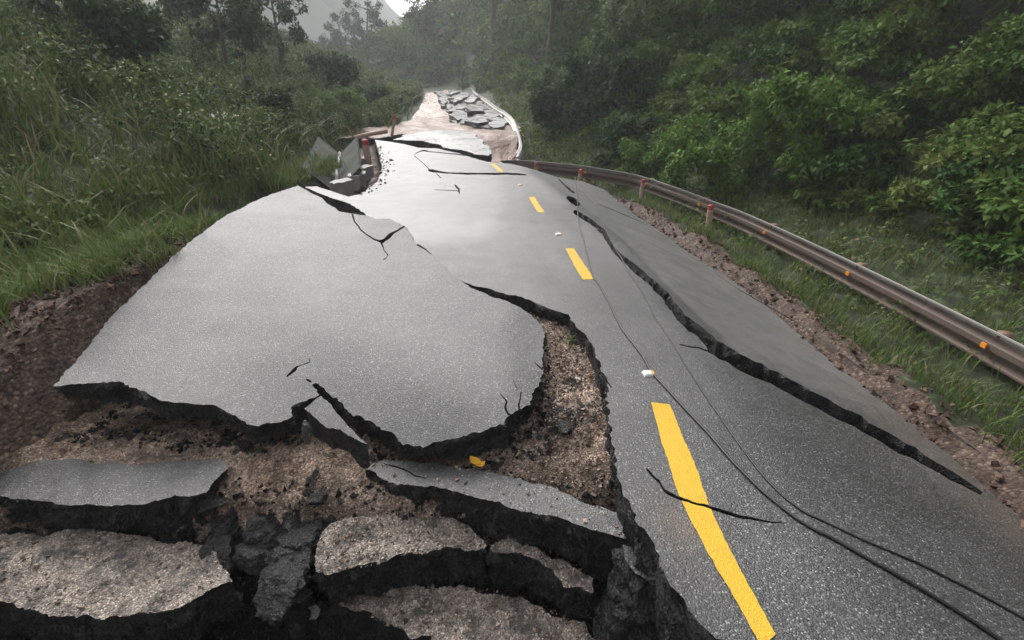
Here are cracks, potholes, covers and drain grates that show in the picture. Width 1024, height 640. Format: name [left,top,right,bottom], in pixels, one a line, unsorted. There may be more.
crack [352,214,432,260]
crack [559,179,982,524]
crack [286,359,312,383]
crack [414,150,527,194]
